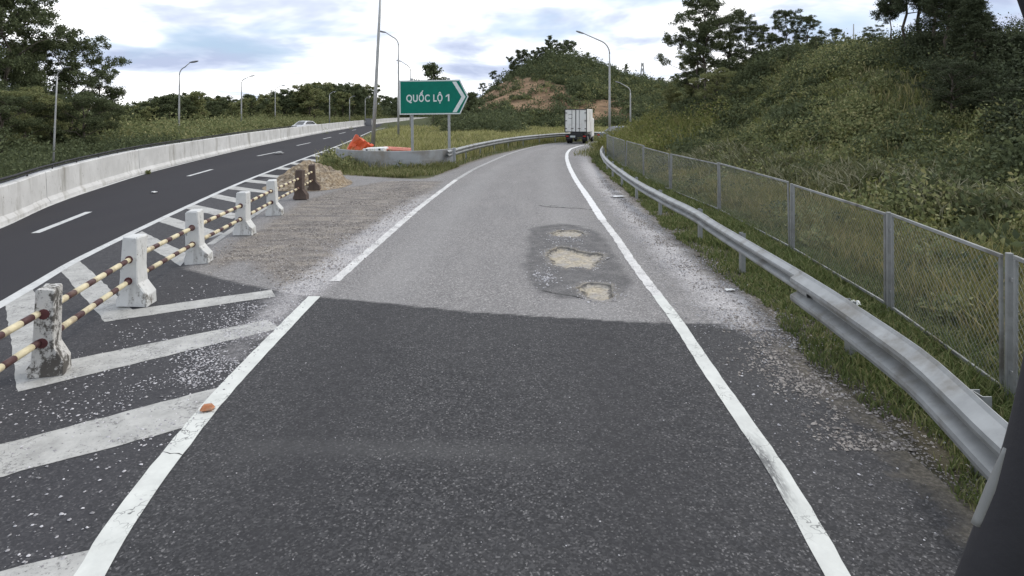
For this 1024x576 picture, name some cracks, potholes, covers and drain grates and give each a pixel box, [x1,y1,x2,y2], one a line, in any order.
pothole [571,281,619,302]
pothole [541,245,608,270]
pothole [547,229,589,238]
